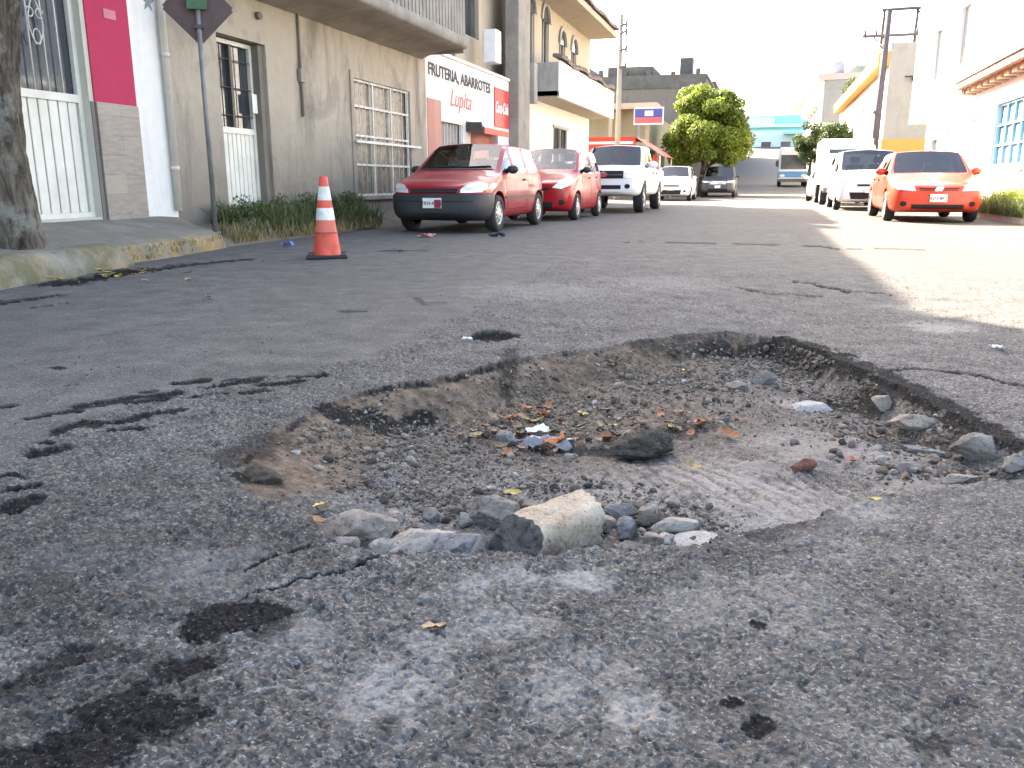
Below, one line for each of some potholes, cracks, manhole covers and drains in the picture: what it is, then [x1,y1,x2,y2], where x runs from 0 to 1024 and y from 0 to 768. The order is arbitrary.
crack [224,542,380,604]
pothole [235,331,1024,557]
crack [887,366,1024,387]
crack [735,280,892,298]
pothole [462,328,523,343]
